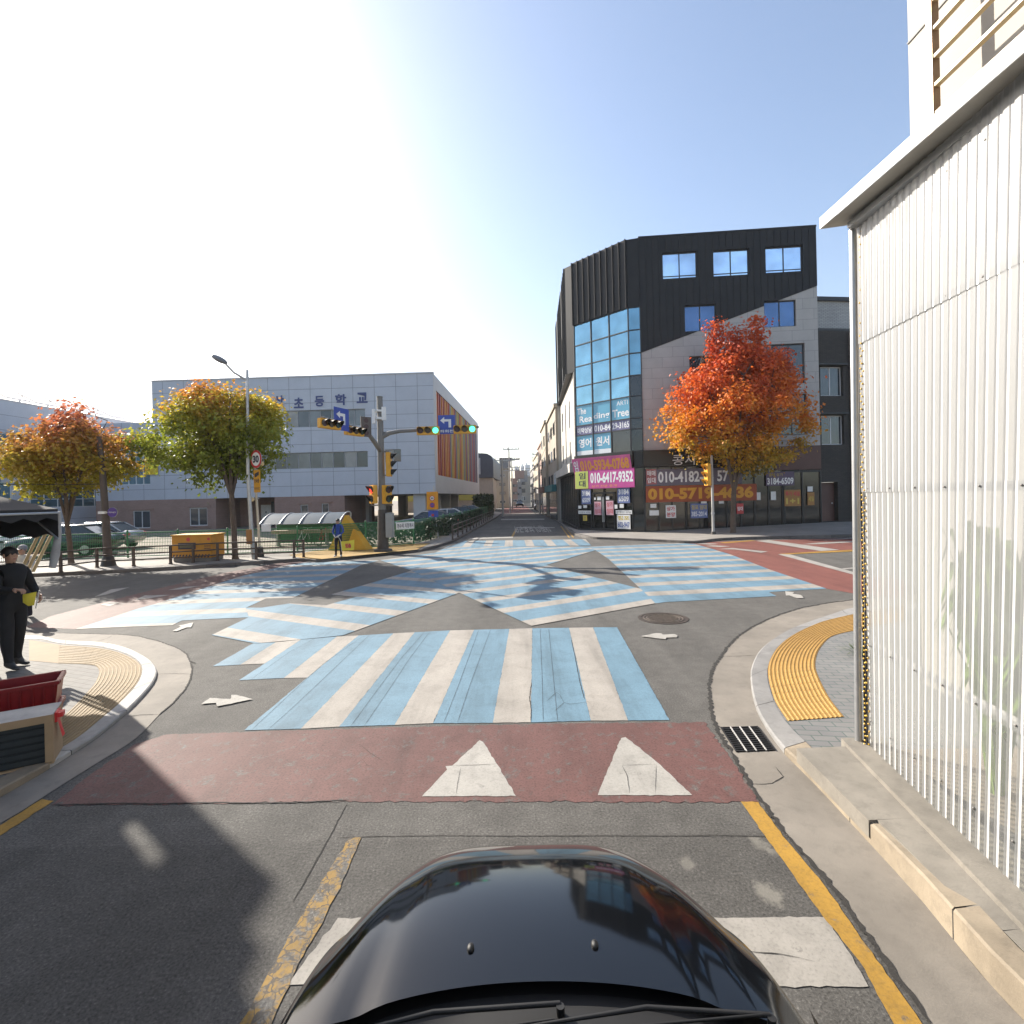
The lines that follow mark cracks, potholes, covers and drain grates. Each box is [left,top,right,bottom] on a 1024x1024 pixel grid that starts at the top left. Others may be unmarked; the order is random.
drain grate [720,726,776,752]
manhole cover [638,612,689,624]
